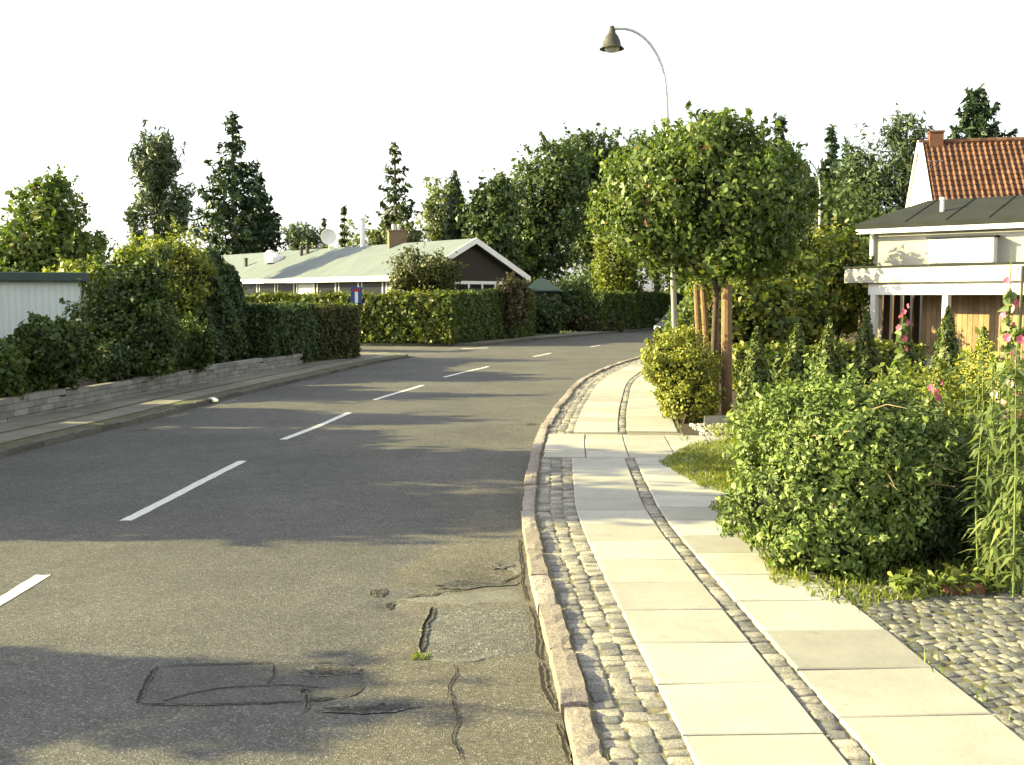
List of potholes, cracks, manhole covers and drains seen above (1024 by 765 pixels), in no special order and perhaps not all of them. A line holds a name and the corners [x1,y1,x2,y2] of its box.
pothole [367,588,387,597]
crack [409,539,557,758]
